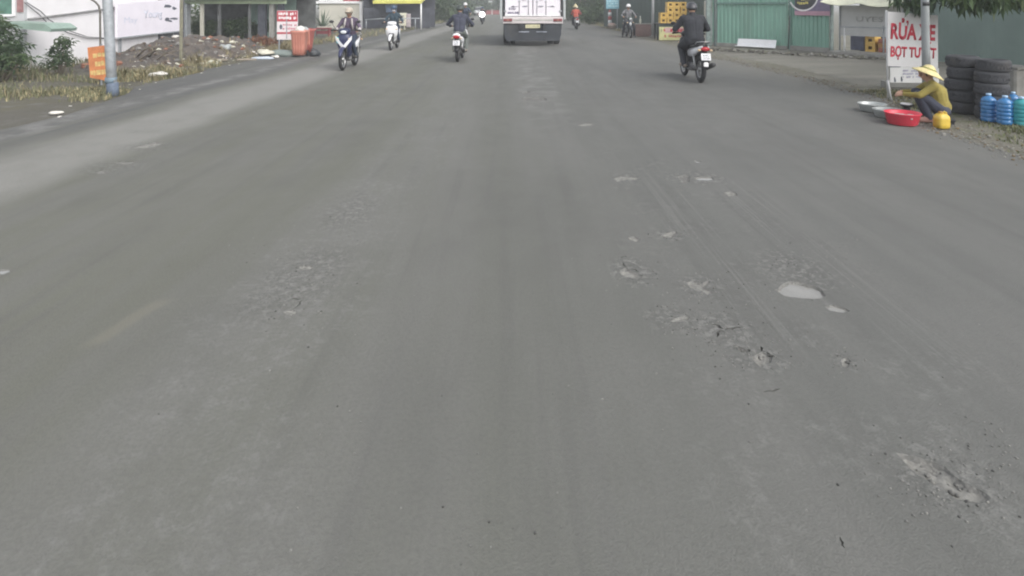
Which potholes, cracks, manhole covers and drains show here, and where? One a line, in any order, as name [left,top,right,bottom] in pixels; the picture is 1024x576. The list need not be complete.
pothole [686,280,715,295]
pothole [620,268,642,279]
pothole [896,453,992,503]
pothole [750,352,773,367]
pothole [825,305,849,313]
pothole [775,281,826,299]
